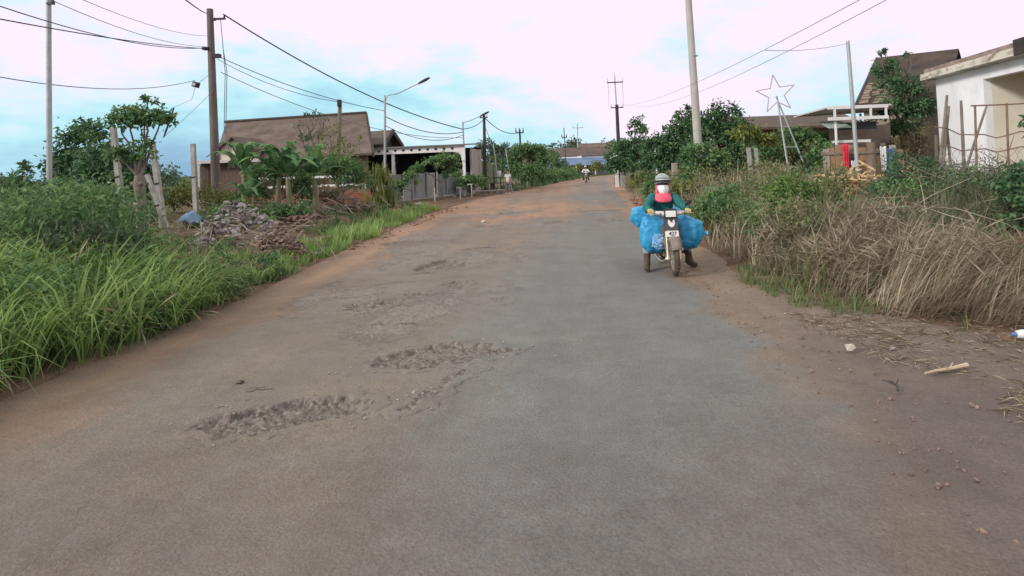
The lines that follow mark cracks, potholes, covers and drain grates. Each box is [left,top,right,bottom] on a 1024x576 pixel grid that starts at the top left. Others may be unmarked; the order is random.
pothole [392,290,438,299]
pothole [333,298,405,315]
pothole [172,391,392,448]
pothole [361,338,530,374]
pothole [406,259,469,273]
